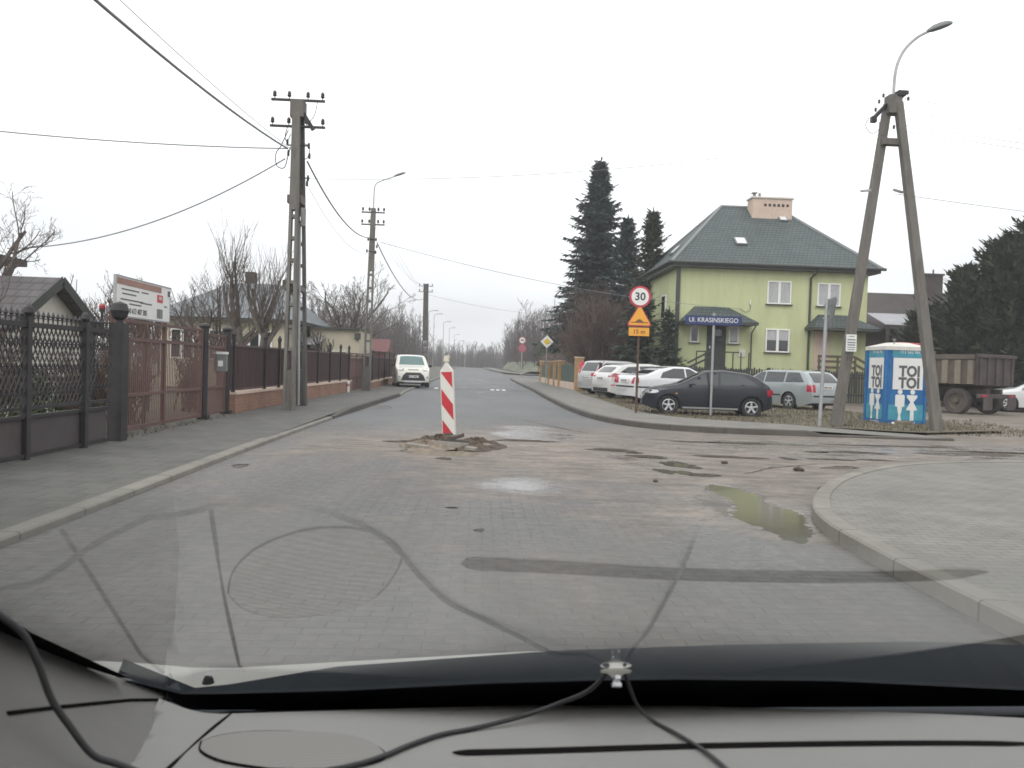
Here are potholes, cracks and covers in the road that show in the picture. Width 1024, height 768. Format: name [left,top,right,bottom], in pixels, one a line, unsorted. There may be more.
pothole [659,461,702,469]
